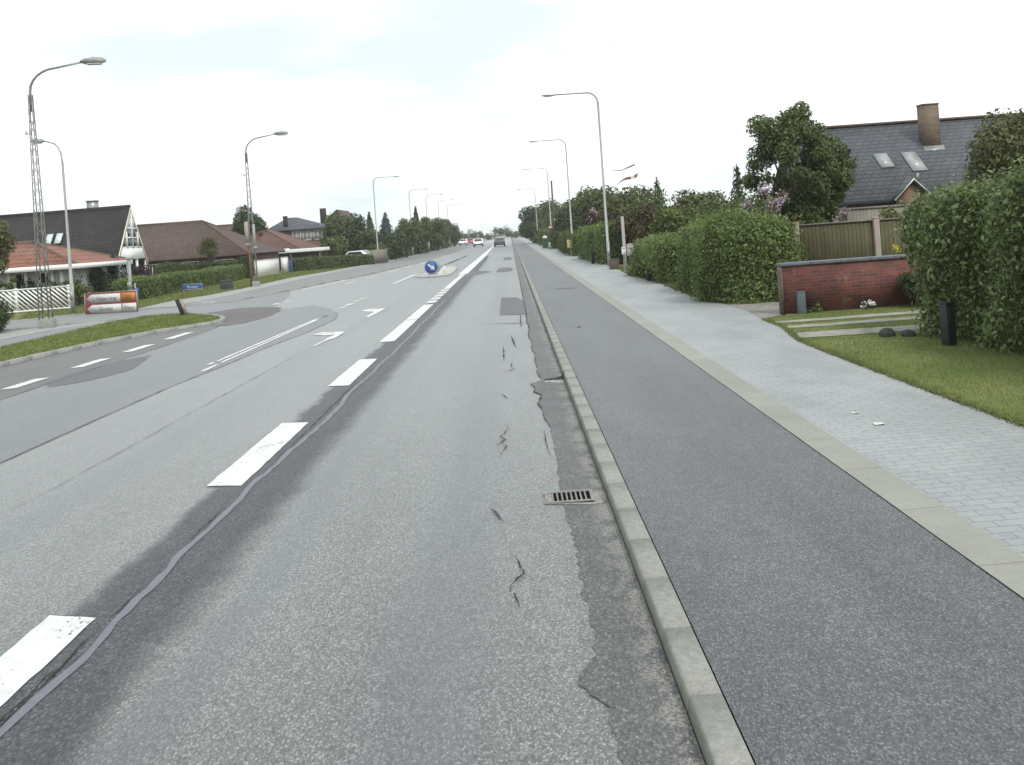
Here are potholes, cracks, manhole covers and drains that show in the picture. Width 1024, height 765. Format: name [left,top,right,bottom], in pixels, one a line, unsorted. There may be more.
crack [510,555,525,607]
crack [492,271,550,453]
drain grate [544,489,595,504]
